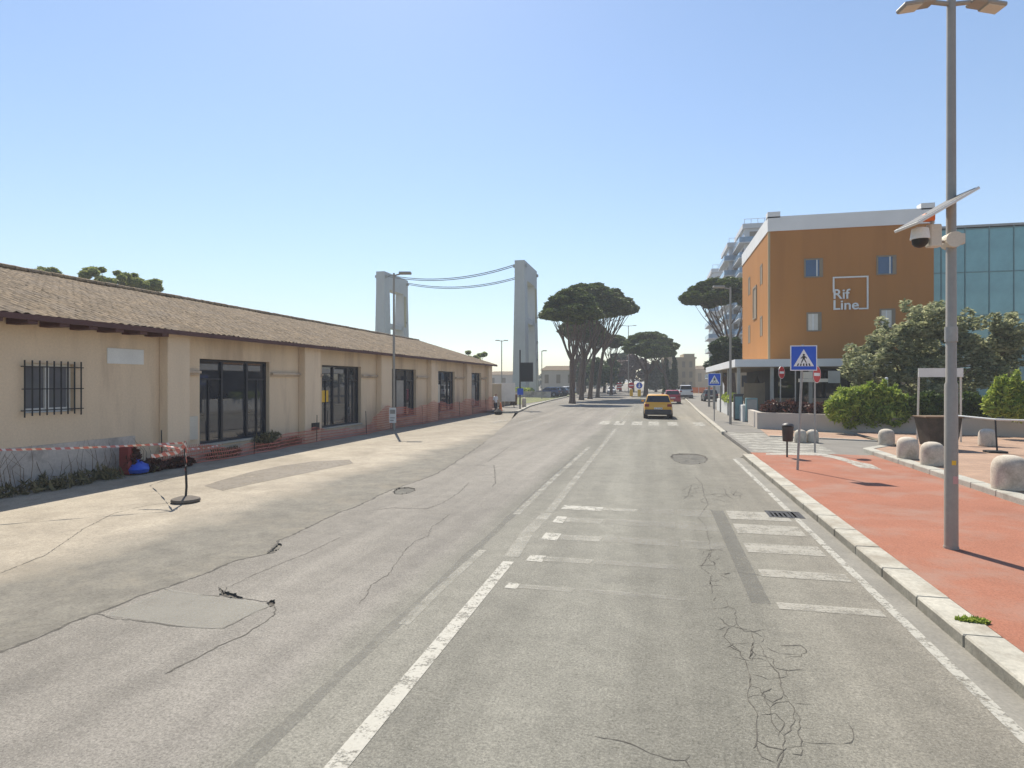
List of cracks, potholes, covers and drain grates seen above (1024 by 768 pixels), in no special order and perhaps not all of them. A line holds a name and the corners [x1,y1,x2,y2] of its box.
drain grate [764,510,806,519]
crack [0,441,507,674]
pothole [219,588,243,599]
crack [713,602,854,768]
crack [596,736,690,767]
crack [682,478,757,601]
